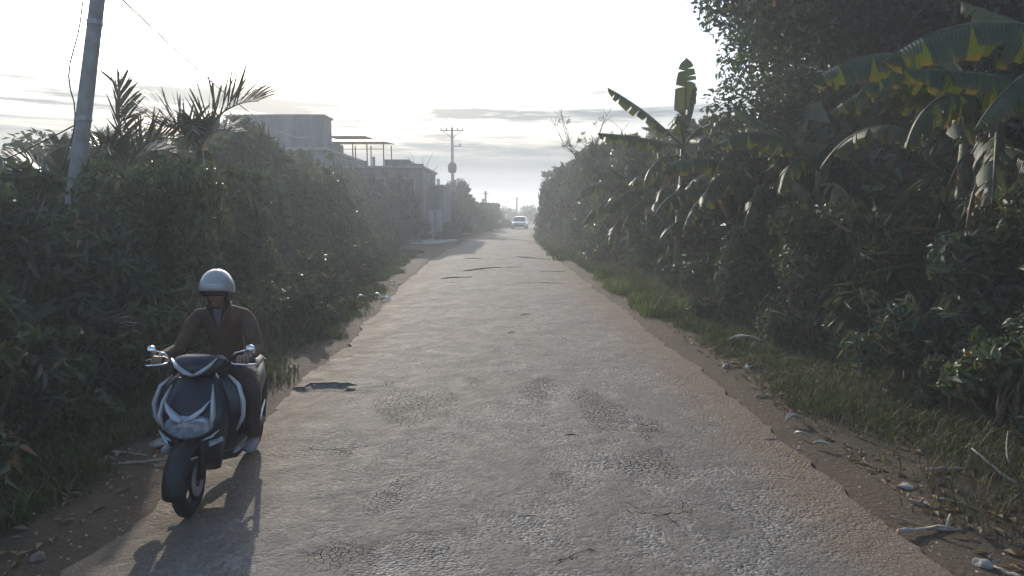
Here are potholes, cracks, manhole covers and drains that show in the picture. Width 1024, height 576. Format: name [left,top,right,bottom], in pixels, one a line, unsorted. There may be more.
crack [370,377,485,428]
pothole [291,382,357,393]
crack [521,378,679,481]
crack [301,542,376,572]
crack [626,501,690,527]
